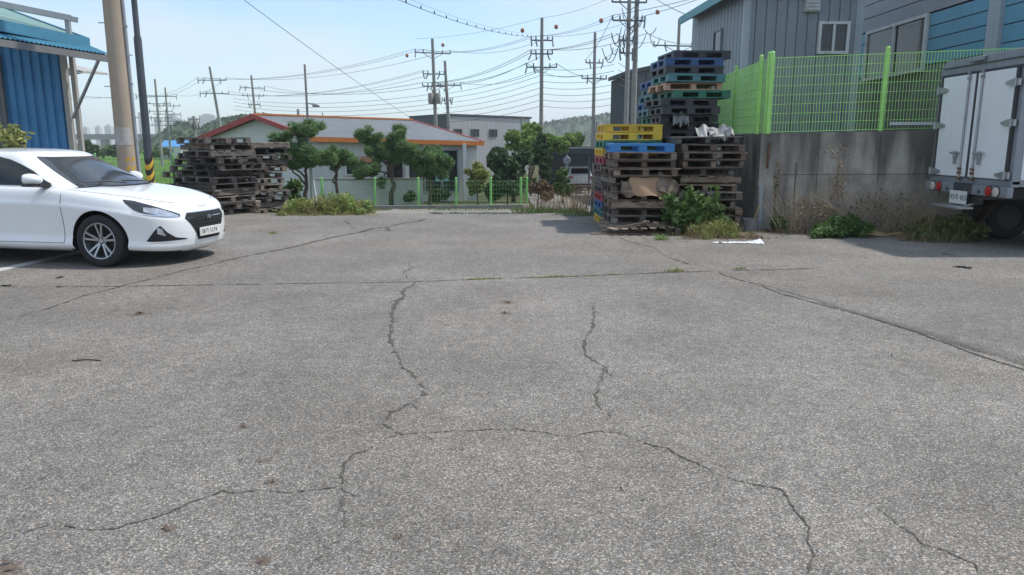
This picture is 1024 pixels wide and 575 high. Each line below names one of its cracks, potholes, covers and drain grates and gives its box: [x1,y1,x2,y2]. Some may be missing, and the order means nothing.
crack [0,264,816,574]
crack [871,505,978,572]
